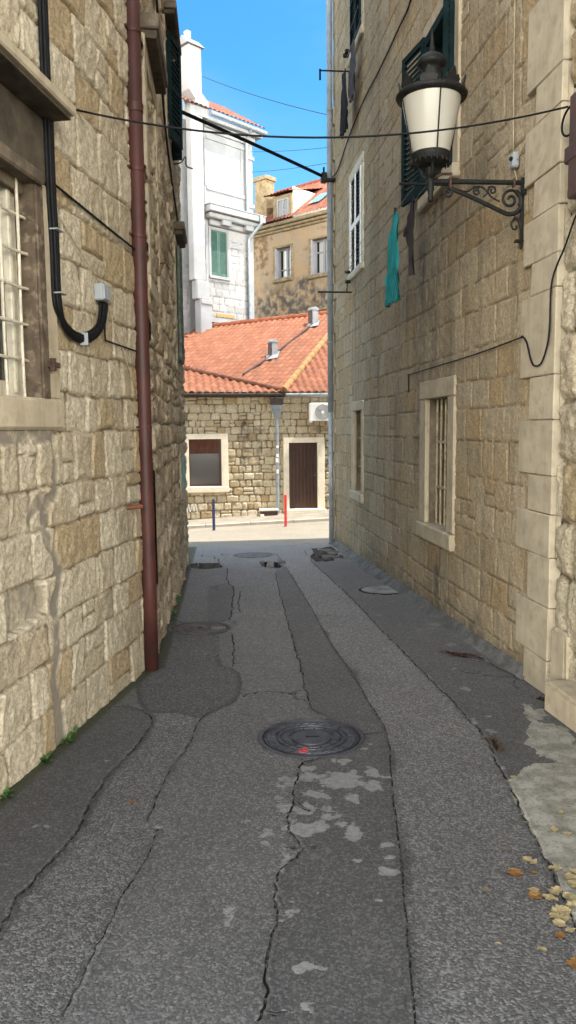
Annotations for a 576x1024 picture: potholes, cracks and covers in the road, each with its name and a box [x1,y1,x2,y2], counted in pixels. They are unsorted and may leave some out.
pothole [187,562,231,570]
pothole [256,560,287,569]
manhole cover [359,586,398,595]
manhole cover [169,621,231,635]
manhole cover [258,718,365,758]
crack [242,543,576,1024]
crack [0,705,211,1017]
pothole [306,546,351,562]
